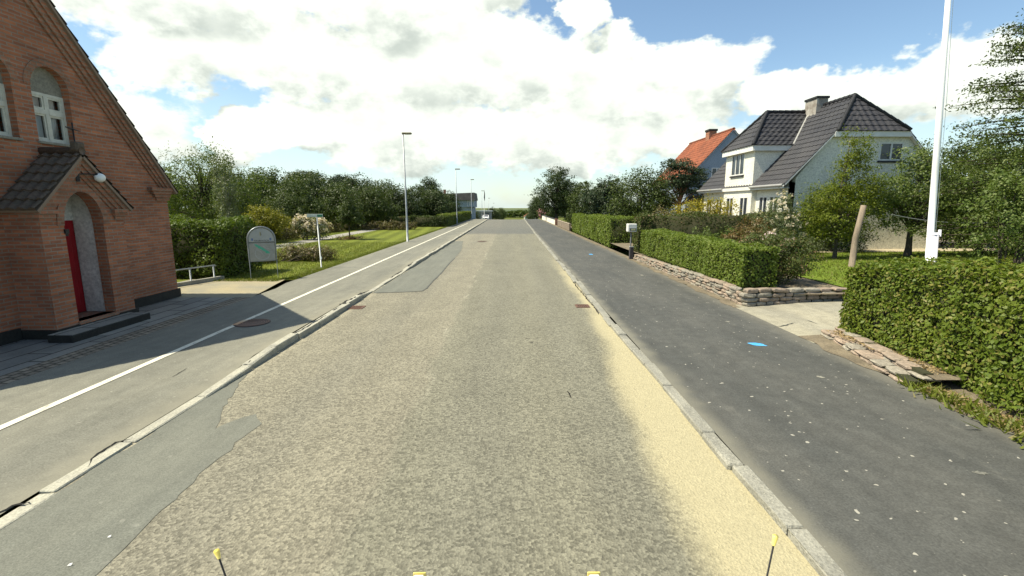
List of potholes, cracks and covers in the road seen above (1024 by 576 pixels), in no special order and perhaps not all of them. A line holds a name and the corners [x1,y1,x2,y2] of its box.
manhole cover [233,319,271,327]
